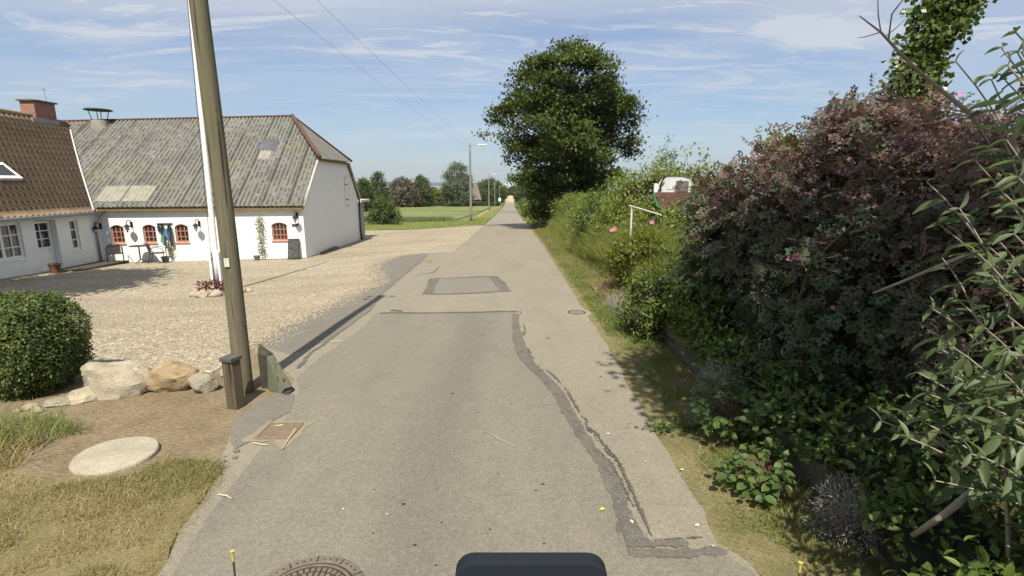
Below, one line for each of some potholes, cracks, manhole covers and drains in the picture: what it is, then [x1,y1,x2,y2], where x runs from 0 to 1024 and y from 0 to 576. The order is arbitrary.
manhole cover [268,556,364,576]
